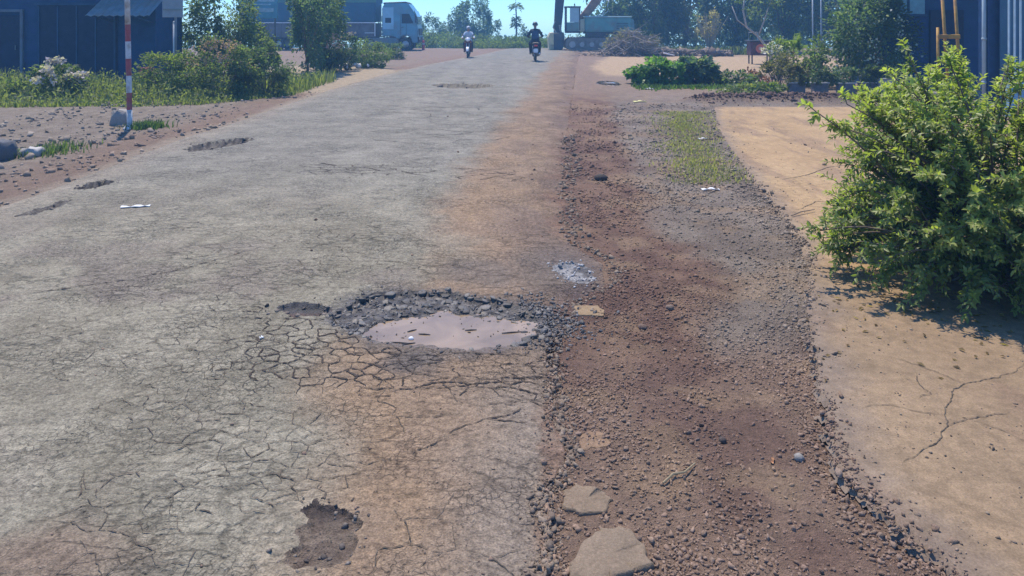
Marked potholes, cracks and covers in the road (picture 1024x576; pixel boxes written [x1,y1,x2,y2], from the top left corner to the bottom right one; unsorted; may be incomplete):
pothole [266,497,371,573]
pothole [324,285,555,359]
pothole [74,179,119,190]
pothole [264,297,333,317]
crack [868,358,1024,460]
pothole [183,137,255,152]
pothole [14,199,79,217]
crack [6,286,598,576]
